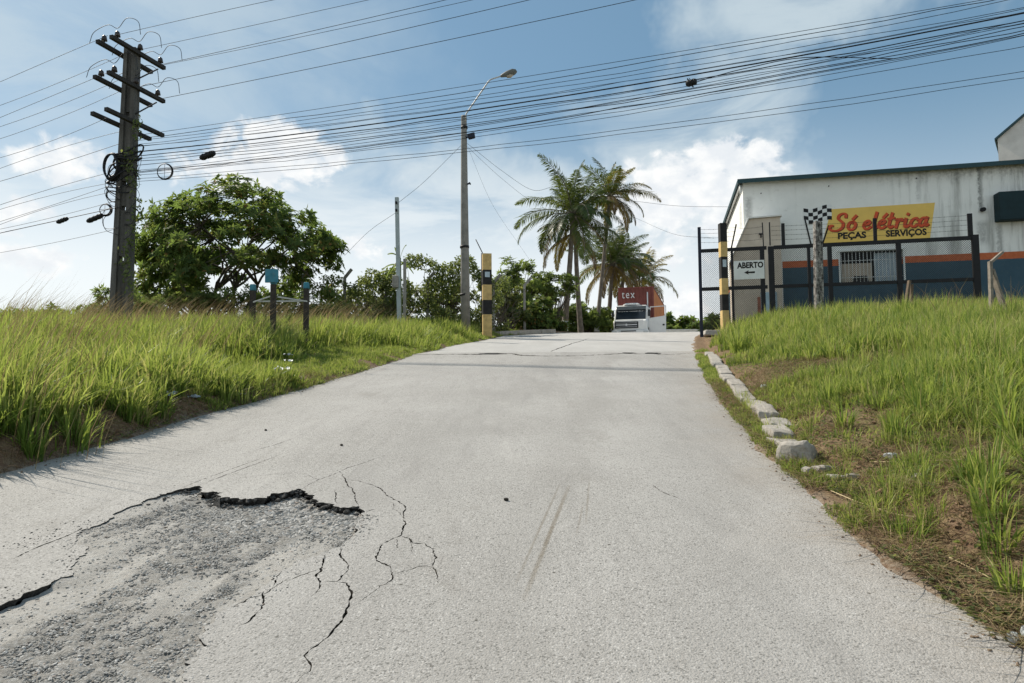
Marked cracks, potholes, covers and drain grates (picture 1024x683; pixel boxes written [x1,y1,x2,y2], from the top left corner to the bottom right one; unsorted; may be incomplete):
pothole [0,486,378,683]
crack [260,460,438,607]
